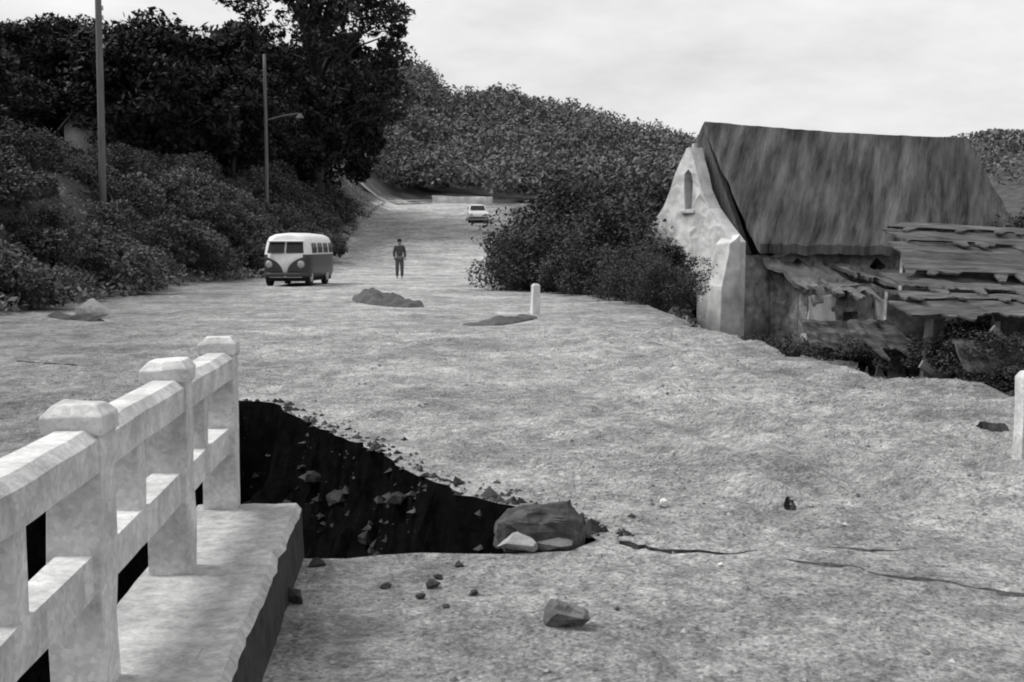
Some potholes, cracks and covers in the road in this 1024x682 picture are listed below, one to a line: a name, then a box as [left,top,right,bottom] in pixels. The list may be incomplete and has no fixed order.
crack [619,541,757,555]
crack [787,546,1024,597]
pothole [195,401,596,559]
